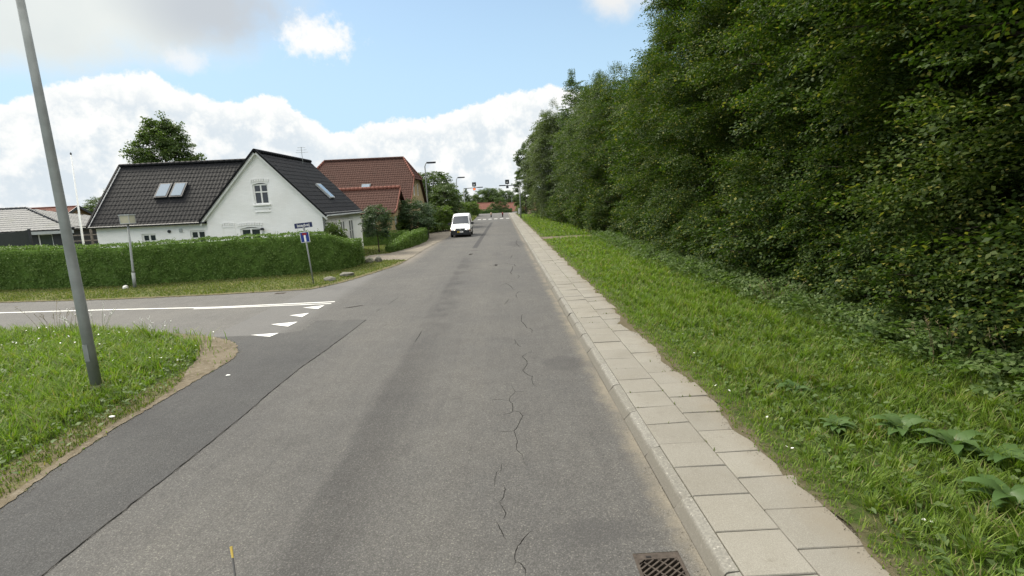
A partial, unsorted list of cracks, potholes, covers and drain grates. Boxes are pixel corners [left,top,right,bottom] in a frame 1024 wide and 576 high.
crack [493,241,535,576]
drain grate [632,551,690,576]
